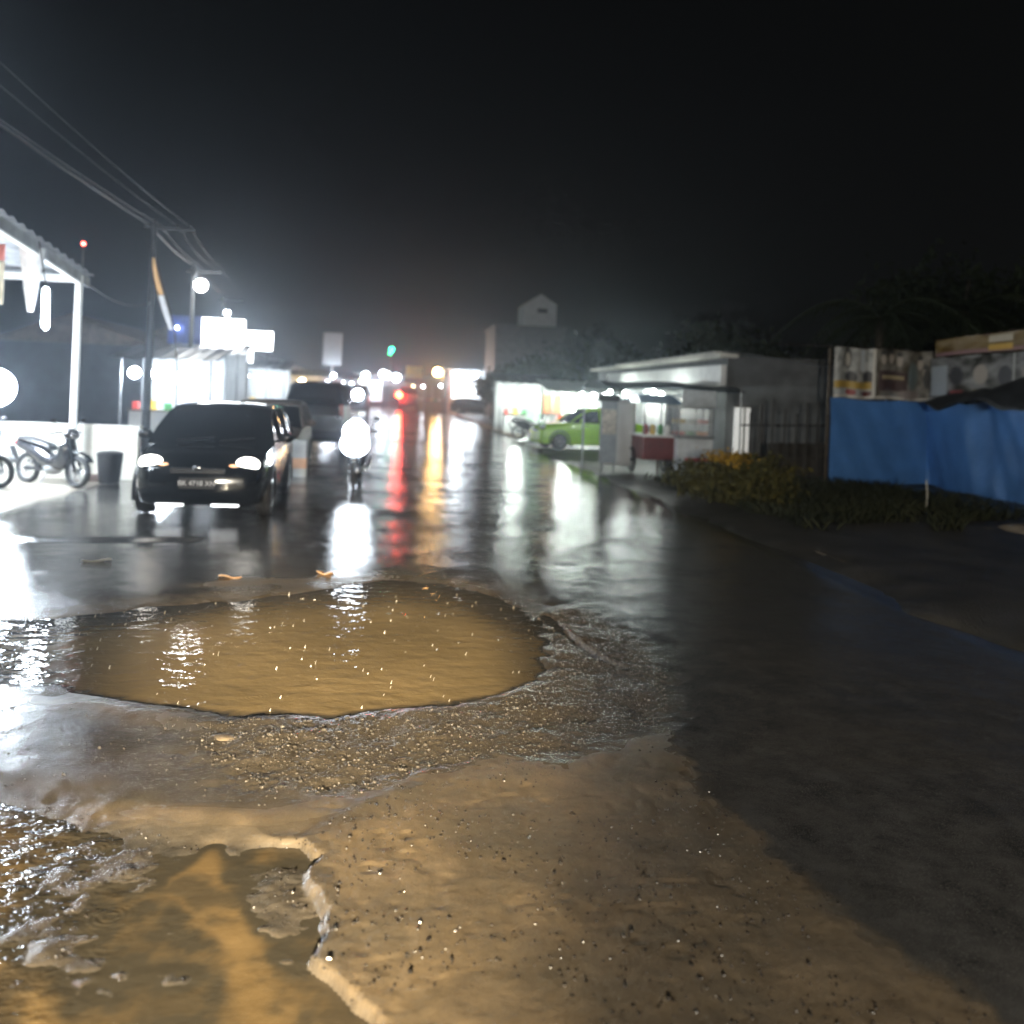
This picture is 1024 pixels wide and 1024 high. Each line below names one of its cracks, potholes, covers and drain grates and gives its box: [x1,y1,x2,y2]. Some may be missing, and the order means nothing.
pothole [0,575,679,798]
pothole [0,769,388,1024]
